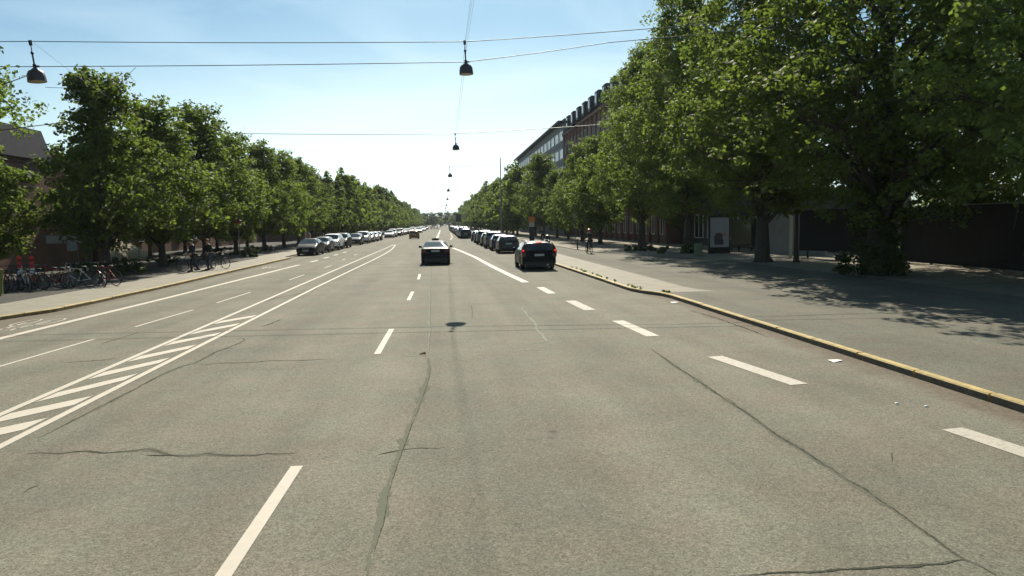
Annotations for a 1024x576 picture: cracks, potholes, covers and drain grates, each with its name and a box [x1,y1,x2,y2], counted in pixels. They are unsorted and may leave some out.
crack [29,447,292,457]
crack [652,310,996,575]
crack [510,307,547,351]
